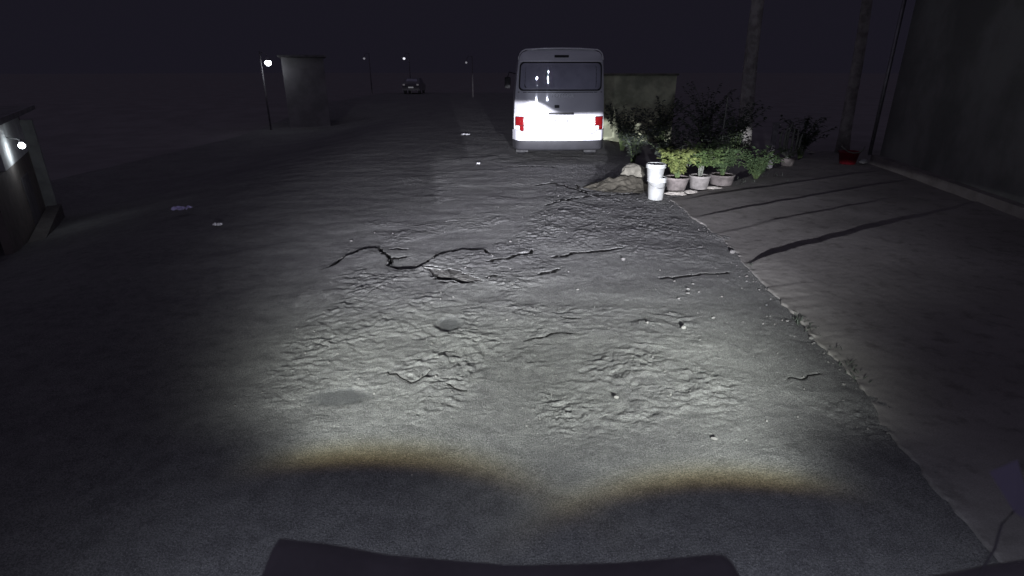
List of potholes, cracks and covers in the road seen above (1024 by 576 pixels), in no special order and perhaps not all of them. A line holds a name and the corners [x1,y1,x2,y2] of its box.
crack [329,247,622,278]
crack [502,166,640,206]
